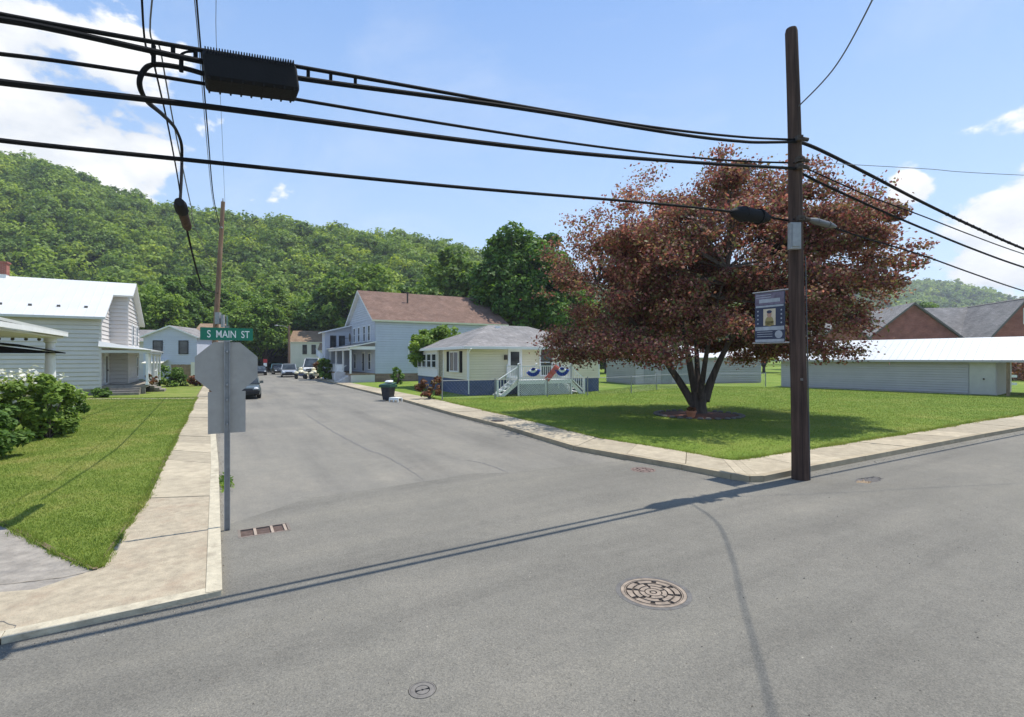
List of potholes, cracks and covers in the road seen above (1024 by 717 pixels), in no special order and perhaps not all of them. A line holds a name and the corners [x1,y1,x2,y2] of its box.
drain grate [237,523,291,538]
manhole cover [409,681,436,699]
manhole cover [616,576,692,610]
